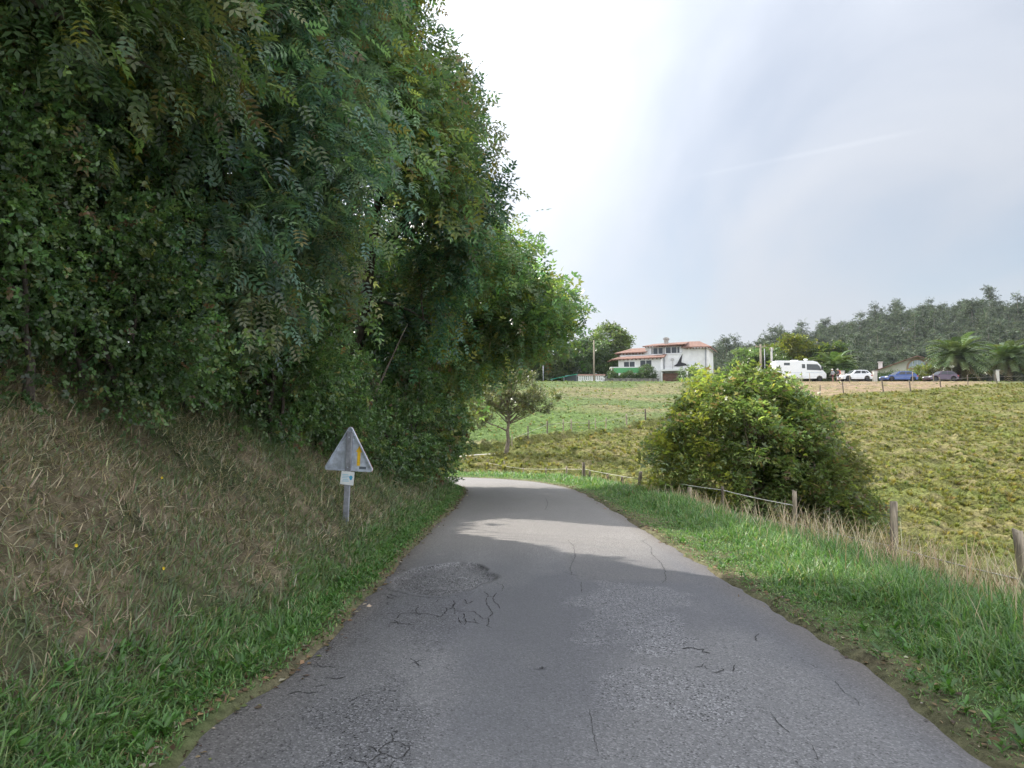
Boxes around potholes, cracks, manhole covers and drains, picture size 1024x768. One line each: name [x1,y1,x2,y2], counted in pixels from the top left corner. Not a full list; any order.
crack [358,733,413,768]
crack [380,582,504,626]
